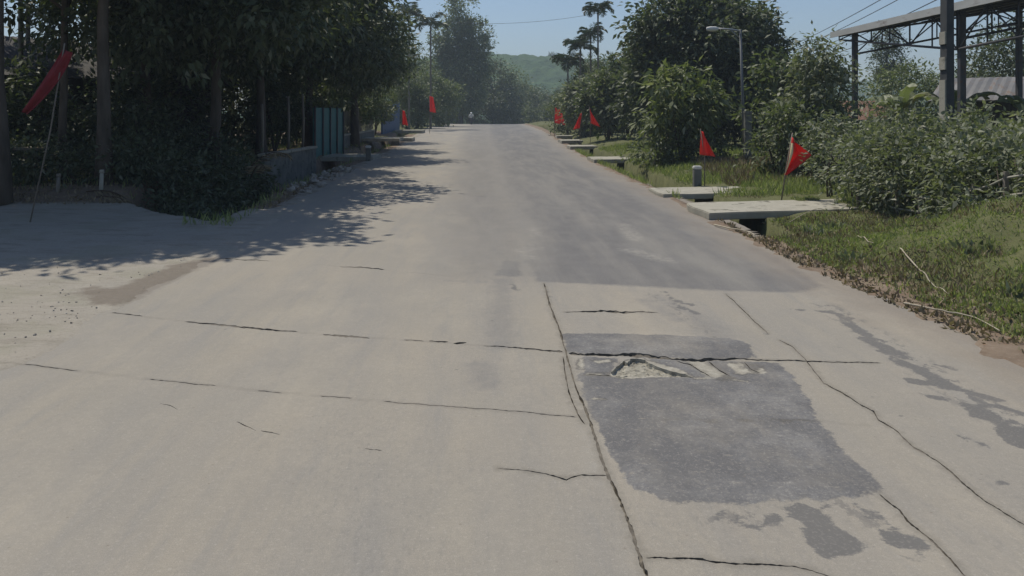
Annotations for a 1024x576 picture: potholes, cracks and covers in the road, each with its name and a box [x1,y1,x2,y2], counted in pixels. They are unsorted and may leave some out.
pothole [611,359,694,379]
crack [25,284,1024,576]
